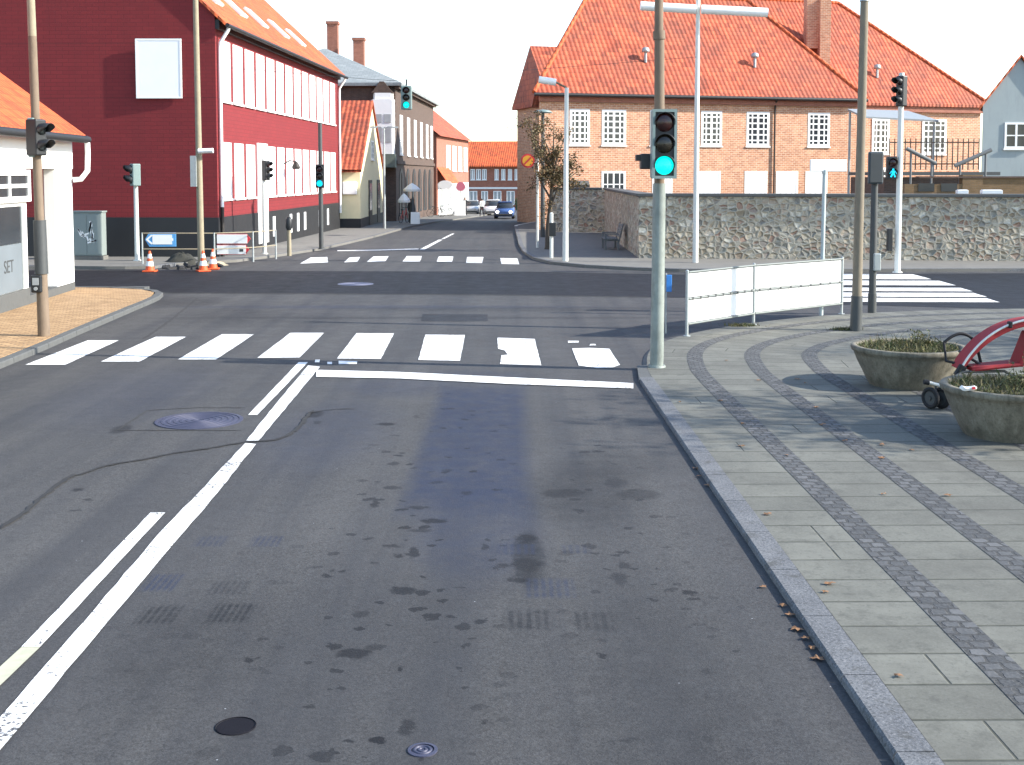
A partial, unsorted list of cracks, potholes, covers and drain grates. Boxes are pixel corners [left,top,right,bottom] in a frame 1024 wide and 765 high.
manhole cover [215,717,256,736]
manhole cover [154,412,243,430]
manhole cover [408,742,438,758]
